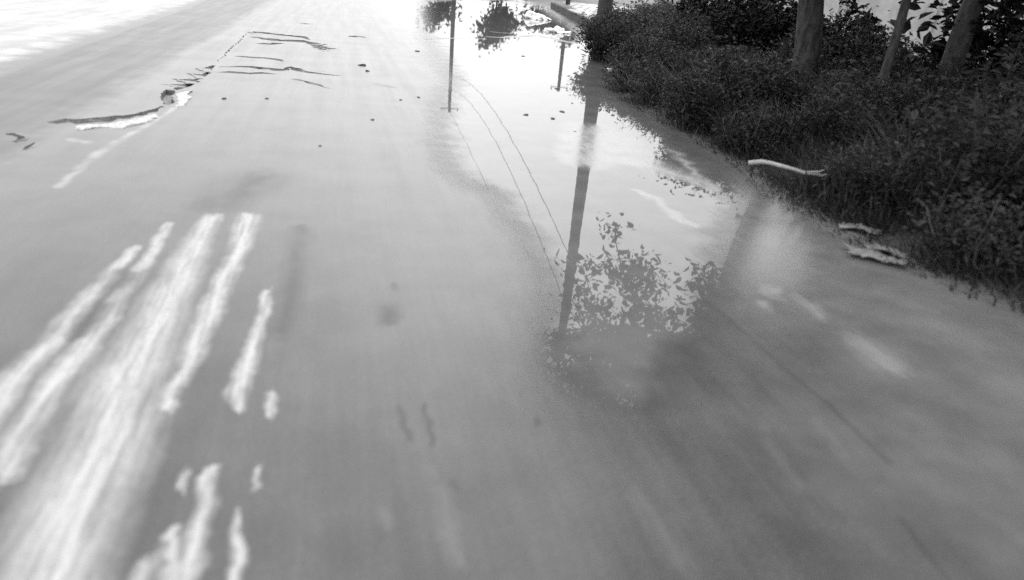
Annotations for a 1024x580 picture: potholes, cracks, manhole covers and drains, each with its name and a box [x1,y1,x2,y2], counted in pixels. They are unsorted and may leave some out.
crack [6,23,375,151]
pothole [159,90,192,107]
